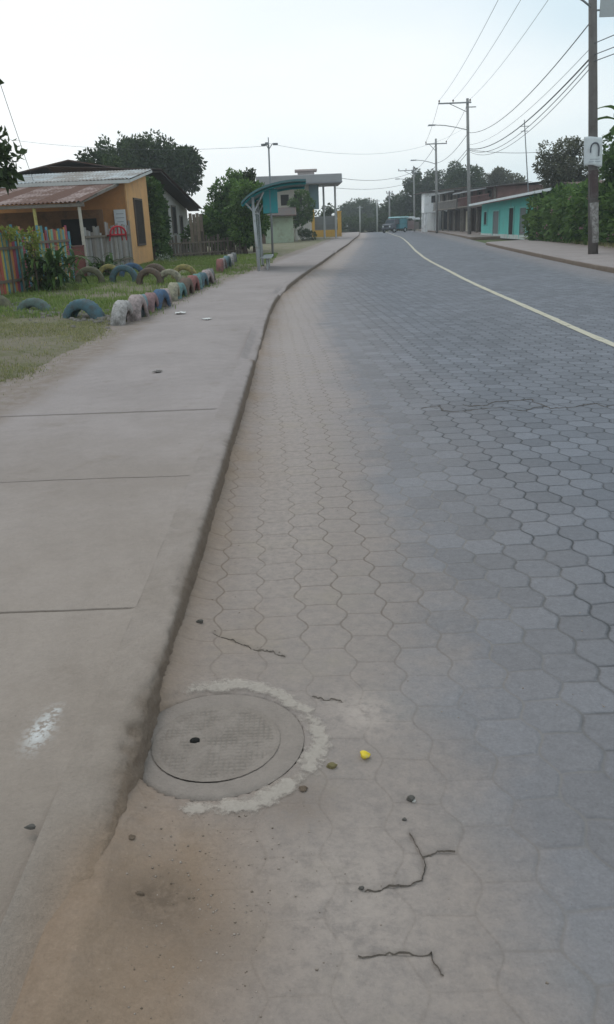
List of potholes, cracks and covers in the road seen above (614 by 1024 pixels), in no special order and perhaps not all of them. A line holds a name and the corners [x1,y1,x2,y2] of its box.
manhole cover [142,679,332,814]
crack [213,633,285,657]
crack [365,833,455,892]
crack [358,951,444,976]
